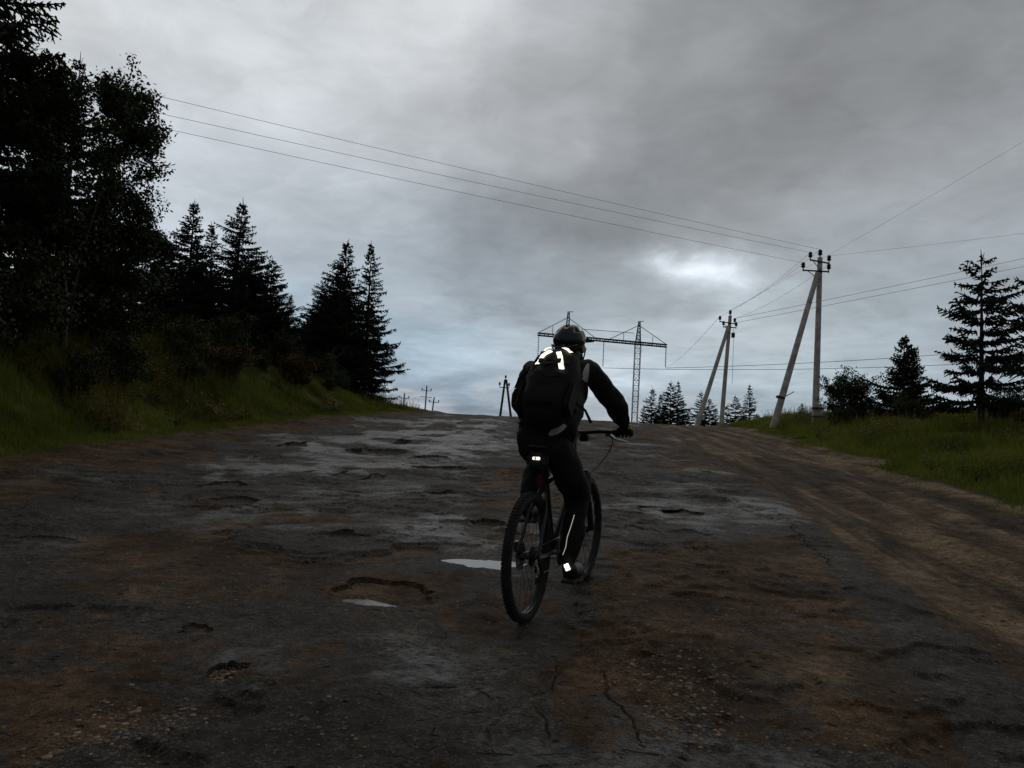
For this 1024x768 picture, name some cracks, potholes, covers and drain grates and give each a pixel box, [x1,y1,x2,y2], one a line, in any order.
pothole [331,445,421,459]
pothole [610,503,719,520]
pothole [252,441,324,453]
pothole [309,574,451,613]
pothole [425,557,539,573]
crack [364,660,666,755]
pothole [374,437,429,448]
